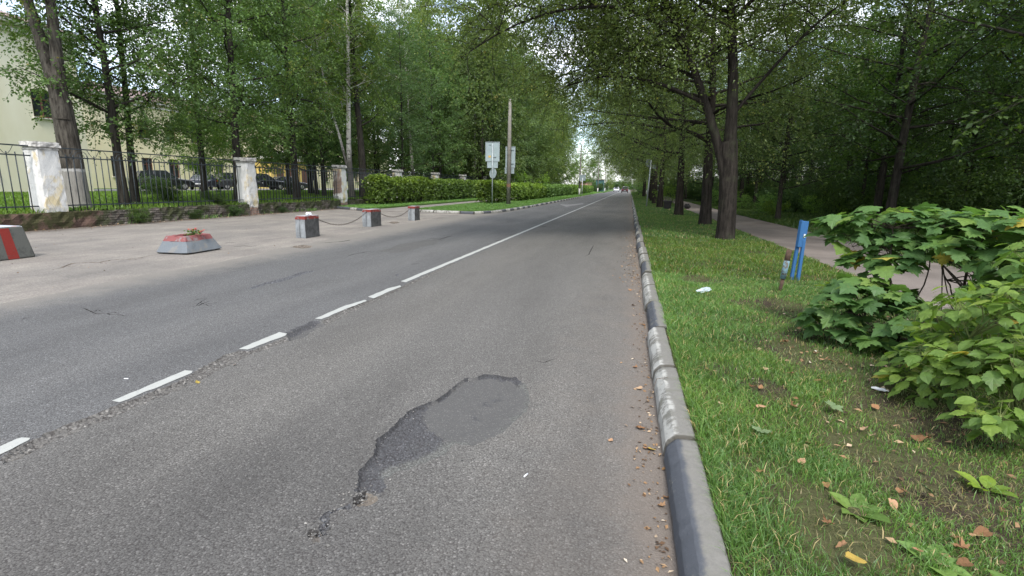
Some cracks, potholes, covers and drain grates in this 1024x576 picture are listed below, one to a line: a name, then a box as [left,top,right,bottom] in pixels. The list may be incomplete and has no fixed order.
pothole [352,491,378,507]
crack [248,270,315,289]
crack [318,504,352,537]
crack [53,254,159,270]
